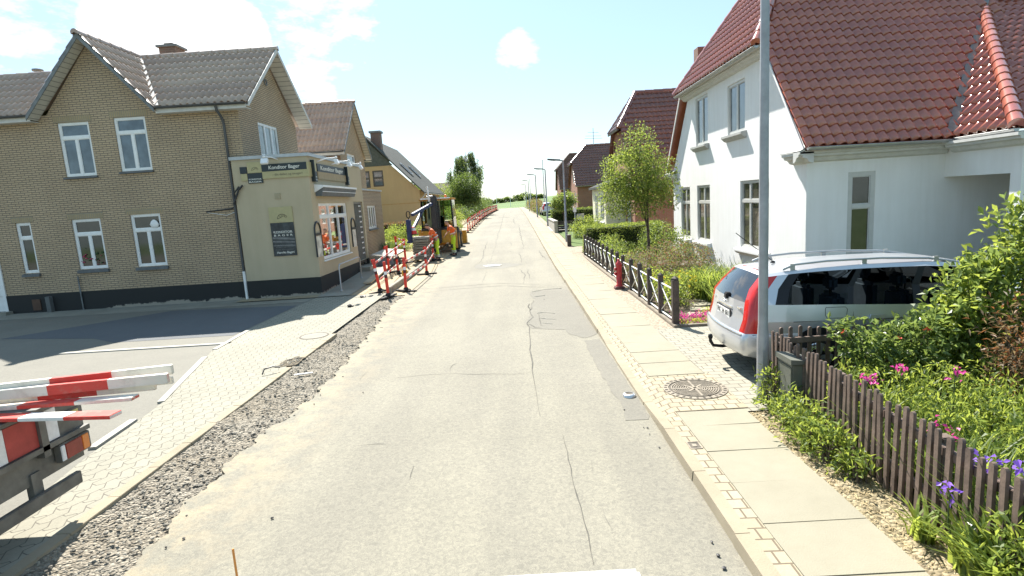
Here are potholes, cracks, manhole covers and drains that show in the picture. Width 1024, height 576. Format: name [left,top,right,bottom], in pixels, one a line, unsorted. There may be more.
utility cover [686,441,703,449]
crack [499,217,546,279]
crack [398,300,543,414]
manhole cover [663,378,728,400]
crack [563,437,611,565]
